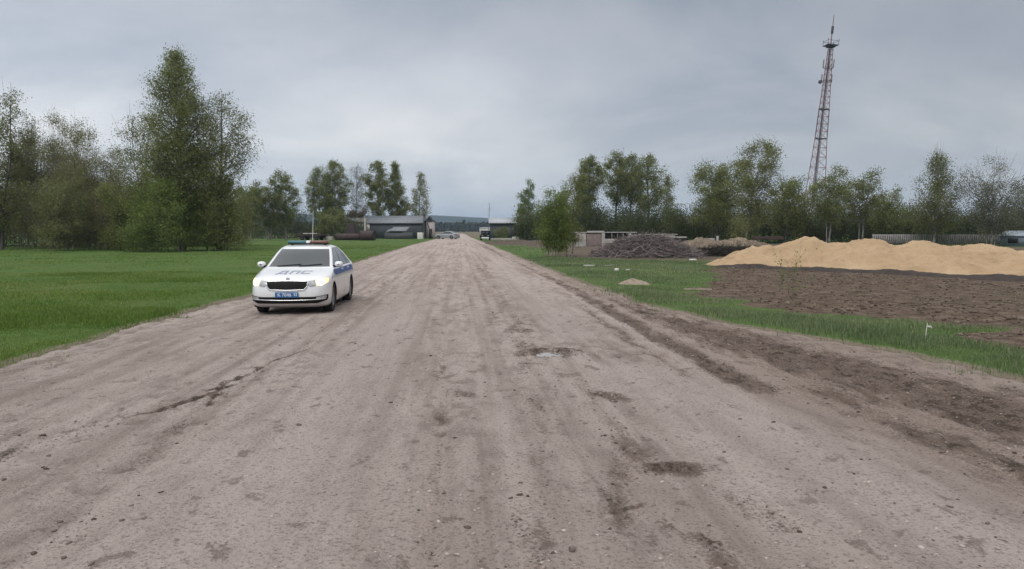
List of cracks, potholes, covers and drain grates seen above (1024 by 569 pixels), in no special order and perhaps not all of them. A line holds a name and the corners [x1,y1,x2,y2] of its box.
pothole [624,461,720,477]
crack [112,349,313,421]
pothole [588,390,635,403]
pothole [512,347,583,358]
